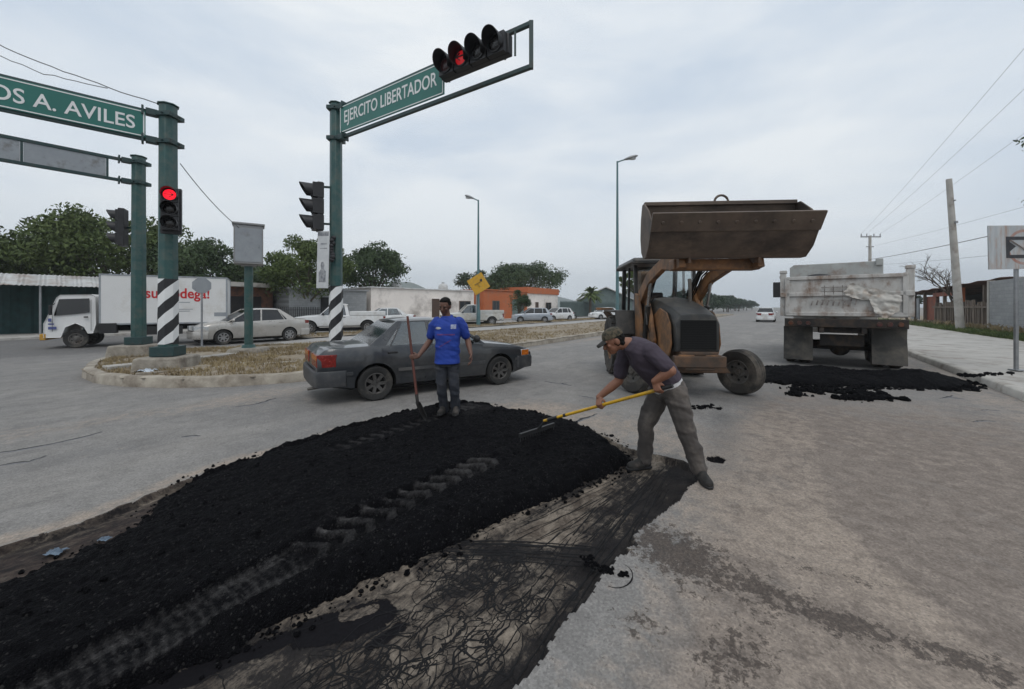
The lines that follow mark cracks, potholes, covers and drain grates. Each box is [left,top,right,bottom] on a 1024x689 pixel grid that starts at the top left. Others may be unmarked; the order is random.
crack [0,431,102,466]
